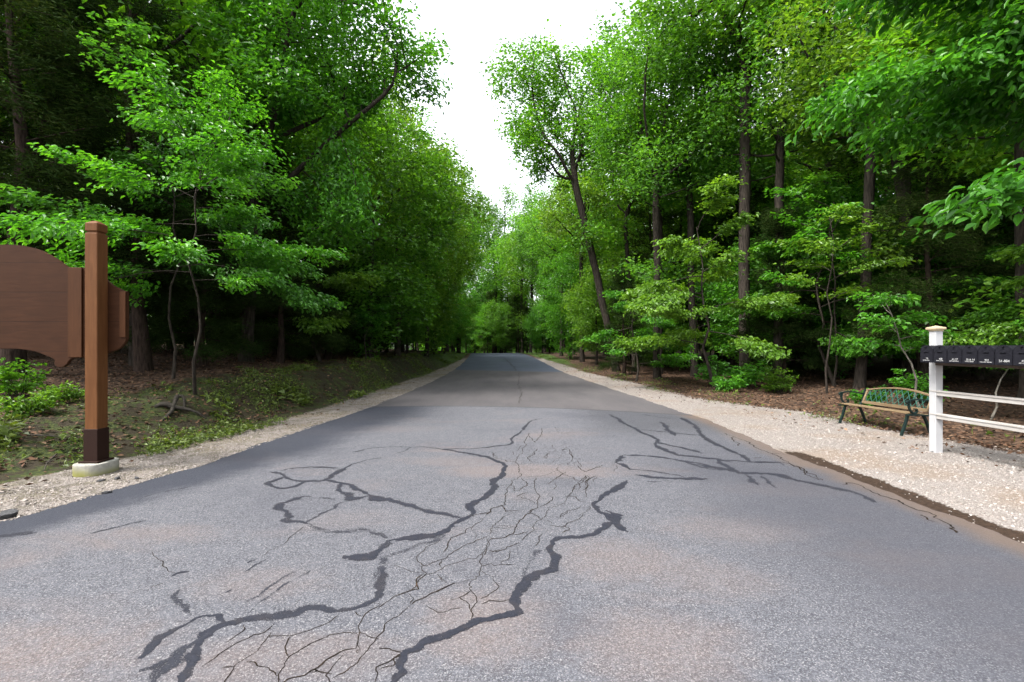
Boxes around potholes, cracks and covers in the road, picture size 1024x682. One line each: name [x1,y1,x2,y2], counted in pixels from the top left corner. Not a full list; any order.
crack [725,433,958,533]
